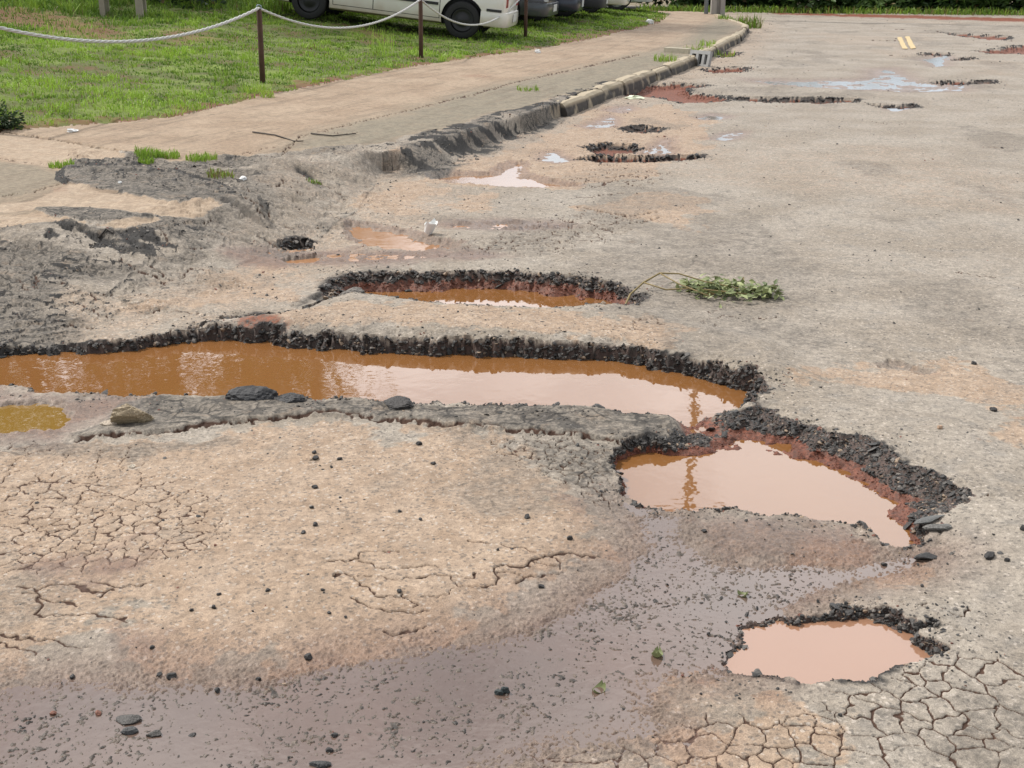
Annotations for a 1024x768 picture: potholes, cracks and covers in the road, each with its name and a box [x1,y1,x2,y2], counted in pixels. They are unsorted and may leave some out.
pothole [616,124,670,134]
pothole [605,401,980,553]
pothole [0,320,769,434]
pothole [578,142,649,158]
crack [0,407,626,657]
pothole [624,82,732,104]
pothole [419,158,589,188]
pothole [723,95,865,104]
crack [499,647,1024,768]
pothole [720,601,953,686]
pothole [314,268,649,308]
pothole [338,218,470,253]
